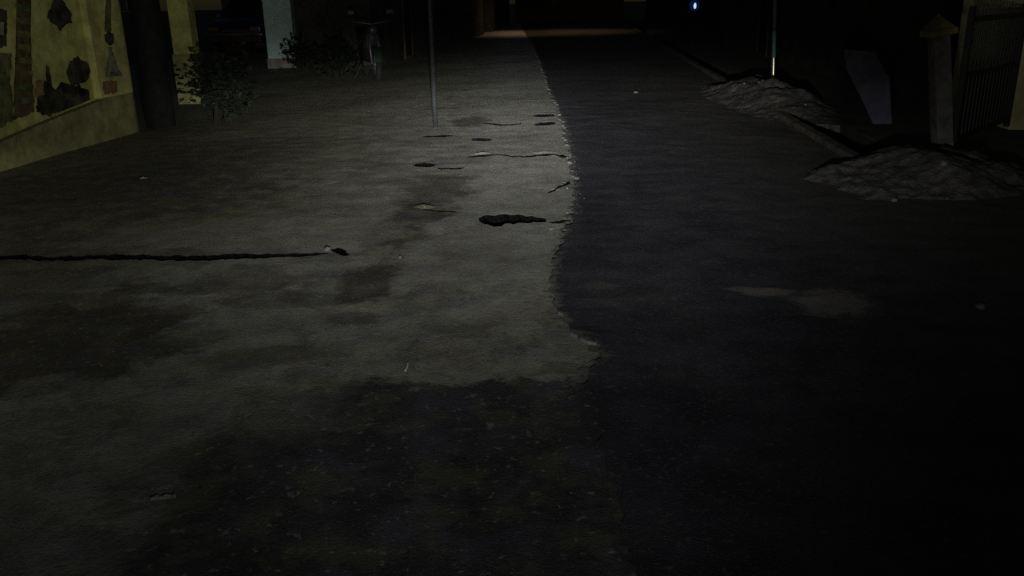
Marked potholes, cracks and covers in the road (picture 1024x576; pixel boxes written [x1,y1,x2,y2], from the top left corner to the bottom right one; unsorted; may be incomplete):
crack [437,154,569,170]
pothole [478,214,546,227]
crack [0,253,328,261]
